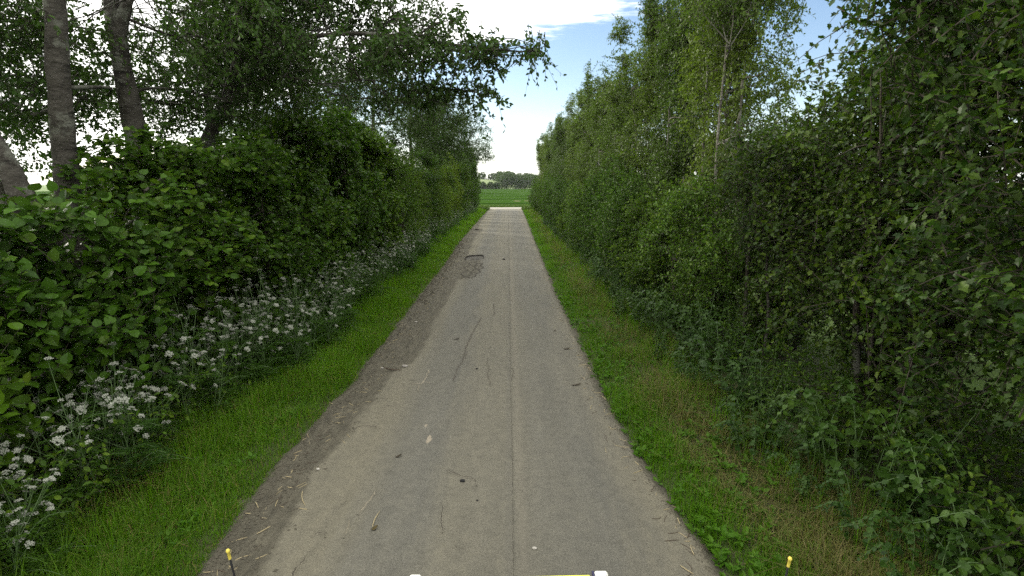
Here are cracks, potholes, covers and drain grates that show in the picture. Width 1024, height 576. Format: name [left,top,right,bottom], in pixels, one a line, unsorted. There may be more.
crack [452,304,496,386]
